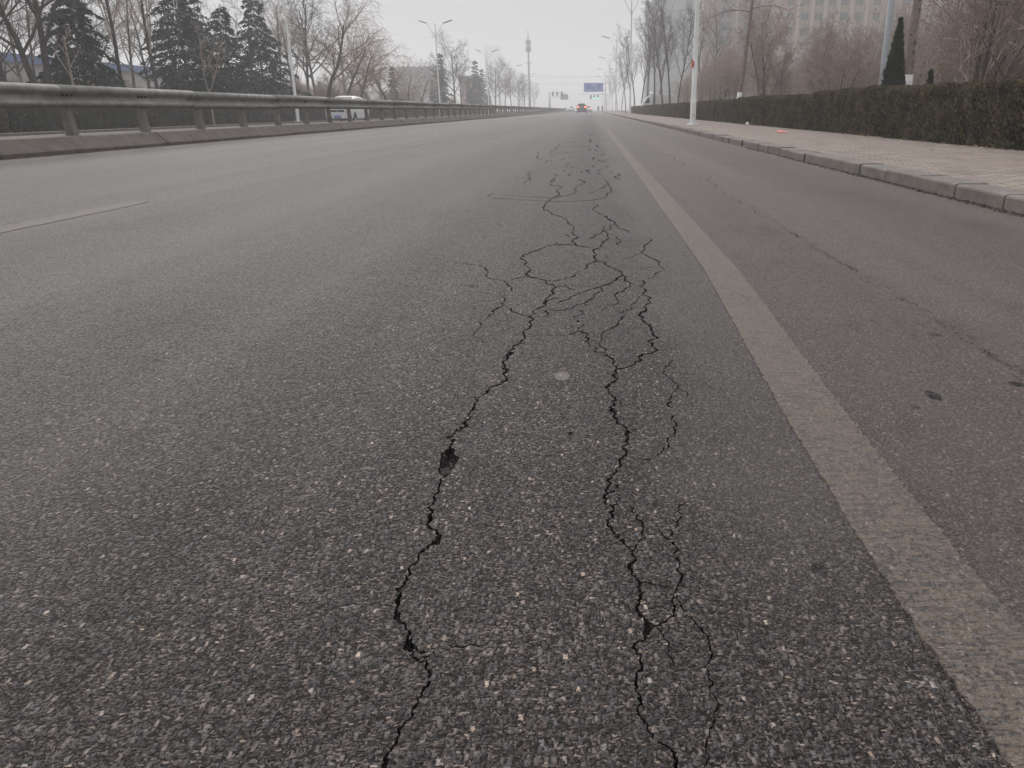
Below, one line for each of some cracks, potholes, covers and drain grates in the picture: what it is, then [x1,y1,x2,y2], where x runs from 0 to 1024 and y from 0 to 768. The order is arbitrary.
pothole [438,448,459,478]
crack [381,178,720,768]
crack [674,158,1024,381]
